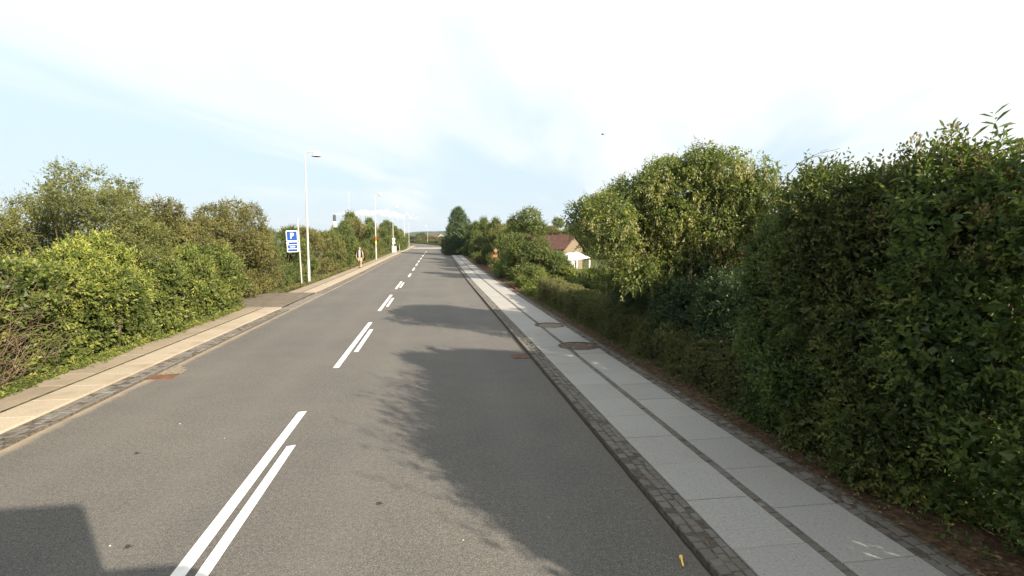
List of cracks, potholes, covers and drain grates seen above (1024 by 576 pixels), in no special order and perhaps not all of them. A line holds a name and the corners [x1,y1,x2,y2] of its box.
manhole cover [558,342,600,350]
